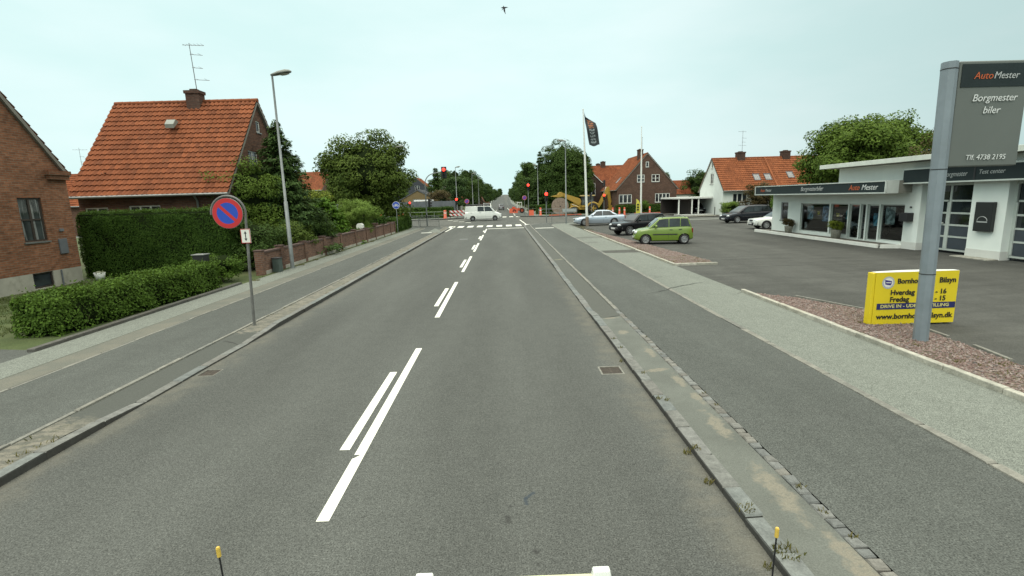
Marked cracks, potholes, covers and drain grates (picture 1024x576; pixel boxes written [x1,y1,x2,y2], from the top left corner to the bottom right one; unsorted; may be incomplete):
drain grate [598,366,625,375]
